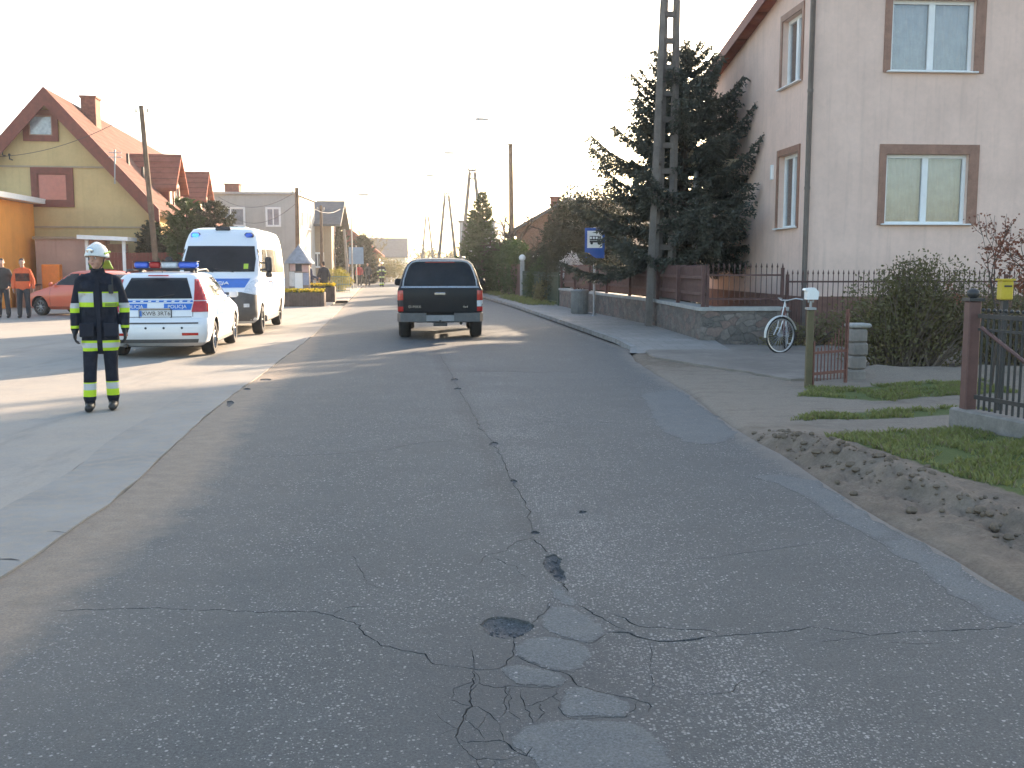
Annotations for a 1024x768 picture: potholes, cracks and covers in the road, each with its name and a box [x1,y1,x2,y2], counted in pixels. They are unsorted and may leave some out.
crack [436,602,661,768]
crack [58,606,447,666]
pothole [543,554,566,583]
crack [481,537,1012,644]
pothole [479,616,534,639]
